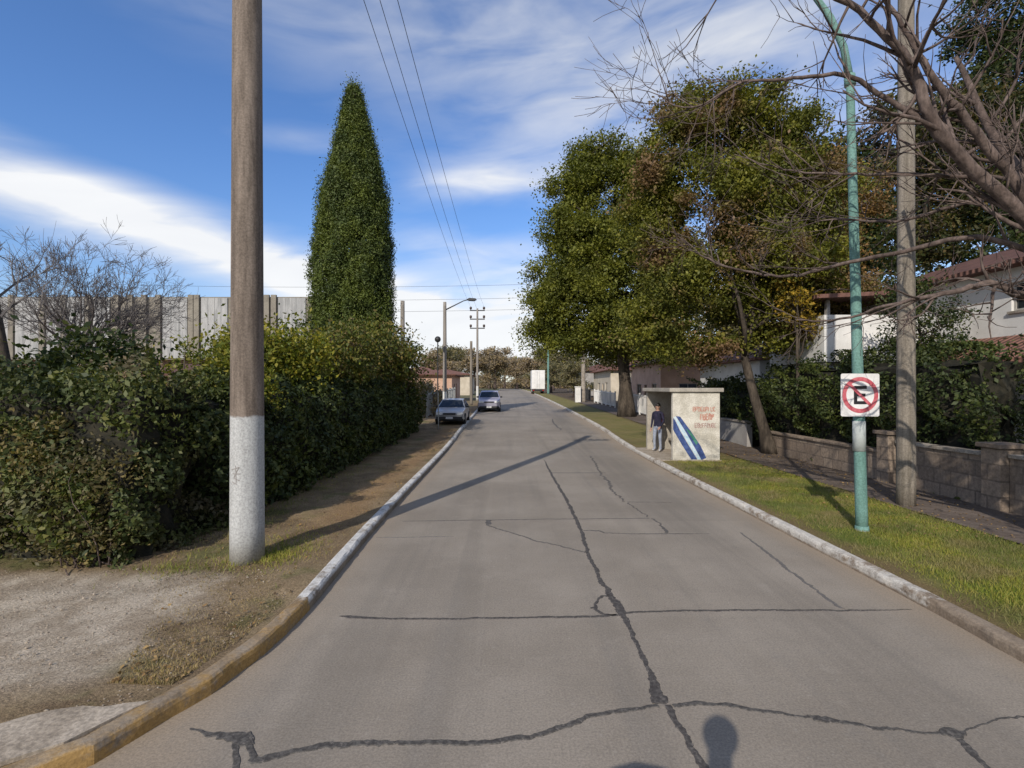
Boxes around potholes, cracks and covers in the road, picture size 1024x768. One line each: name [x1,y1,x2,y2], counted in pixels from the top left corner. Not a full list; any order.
crack [376,456,709,553]
crack [339,532,912,620]
